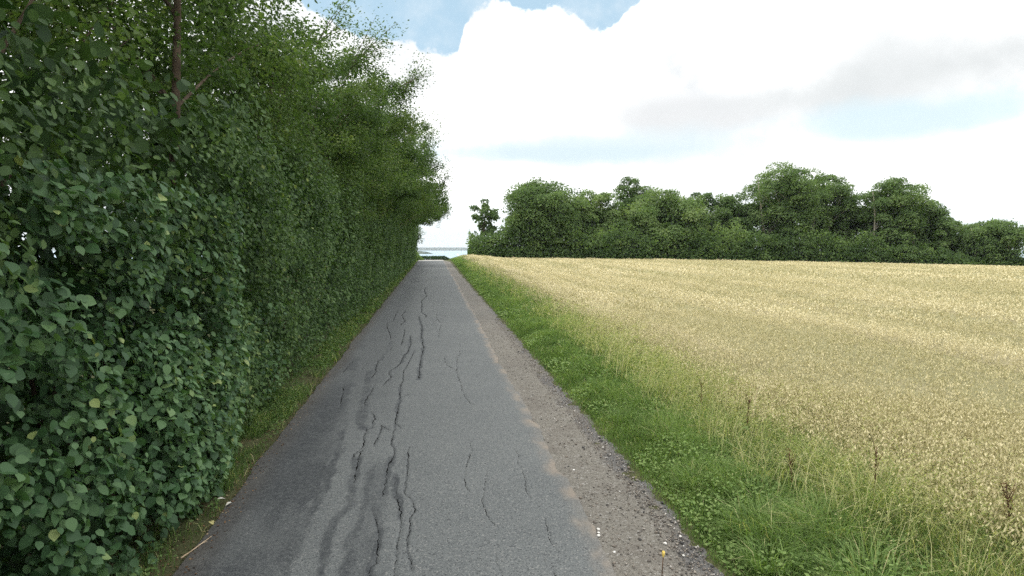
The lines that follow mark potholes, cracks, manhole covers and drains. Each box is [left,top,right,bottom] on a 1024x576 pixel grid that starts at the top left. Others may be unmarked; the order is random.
crack [343,290,441,576]
